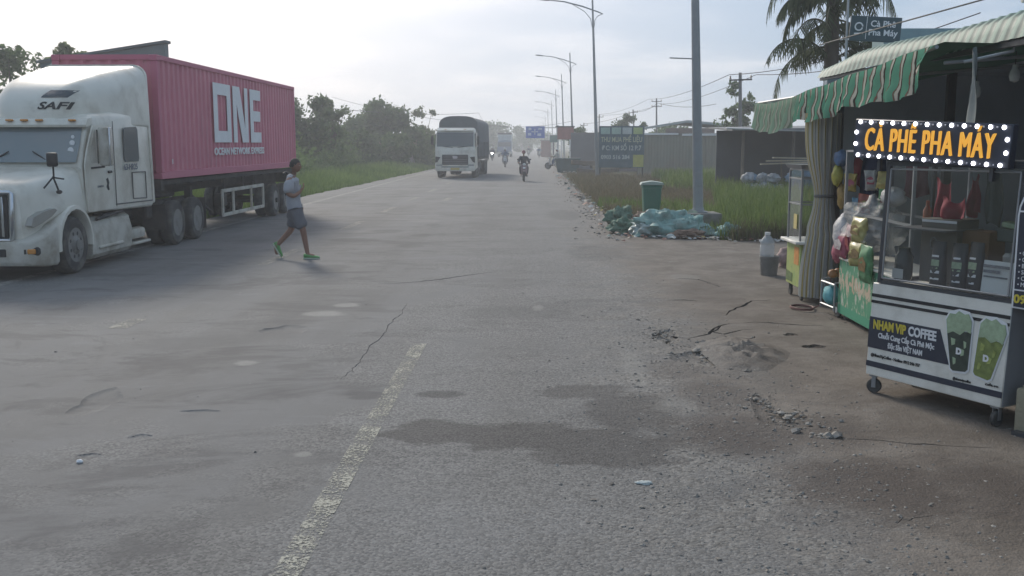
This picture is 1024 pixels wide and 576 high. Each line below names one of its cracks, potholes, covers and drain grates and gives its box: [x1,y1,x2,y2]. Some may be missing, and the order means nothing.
pothole [652,329,679,344]
pothole [669,350,718,367]
crack [858,439,987,448]
crack [671,300,818,339]
